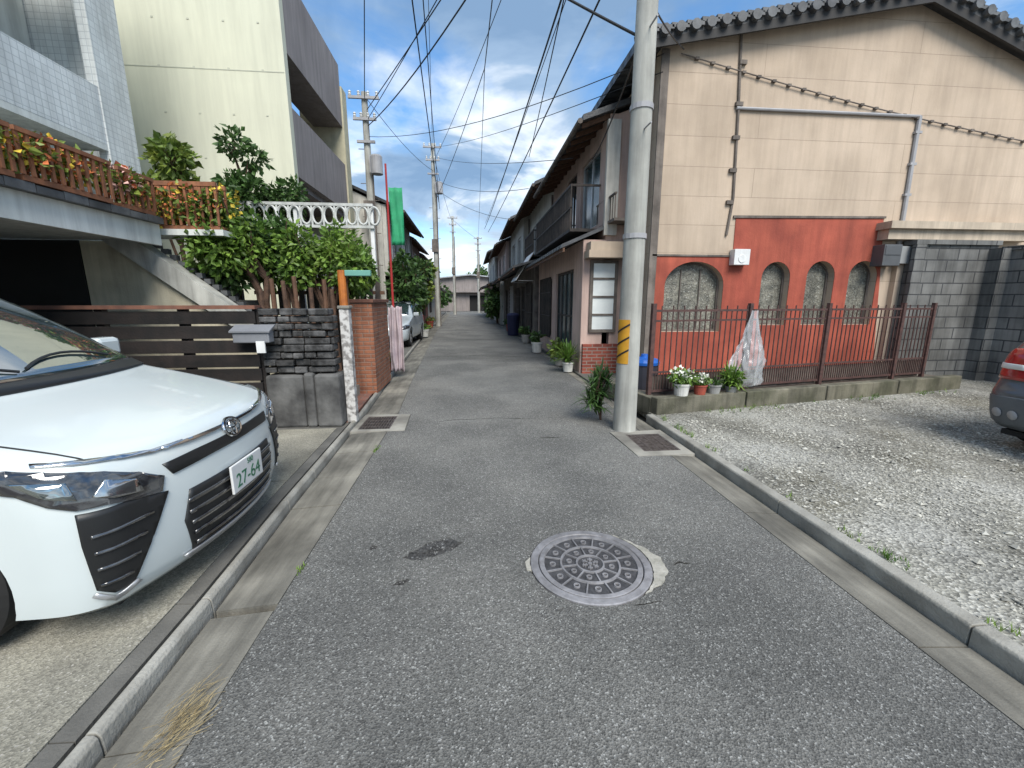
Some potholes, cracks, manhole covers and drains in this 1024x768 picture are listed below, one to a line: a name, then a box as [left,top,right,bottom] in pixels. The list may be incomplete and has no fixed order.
manhole cover [525,531,668,607]
drain grate [350,414,411,435]
drain grate [610,430,695,457]
